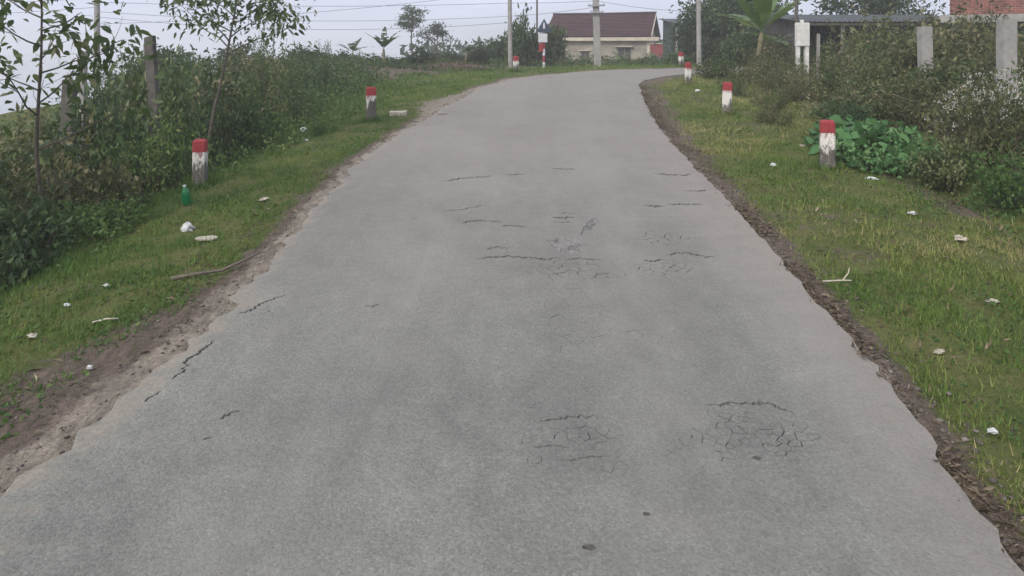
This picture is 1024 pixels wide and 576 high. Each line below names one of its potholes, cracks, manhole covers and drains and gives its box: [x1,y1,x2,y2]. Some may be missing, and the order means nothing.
crack [476,246,719,356]
crack [518,413,628,478]
crack [645,173,706,208]
crack [144,340,215,402]
crack [629,231,712,276]
crack [237,295,297,316]
crack [444,205,526,227]
crack [678,400,820,472]
